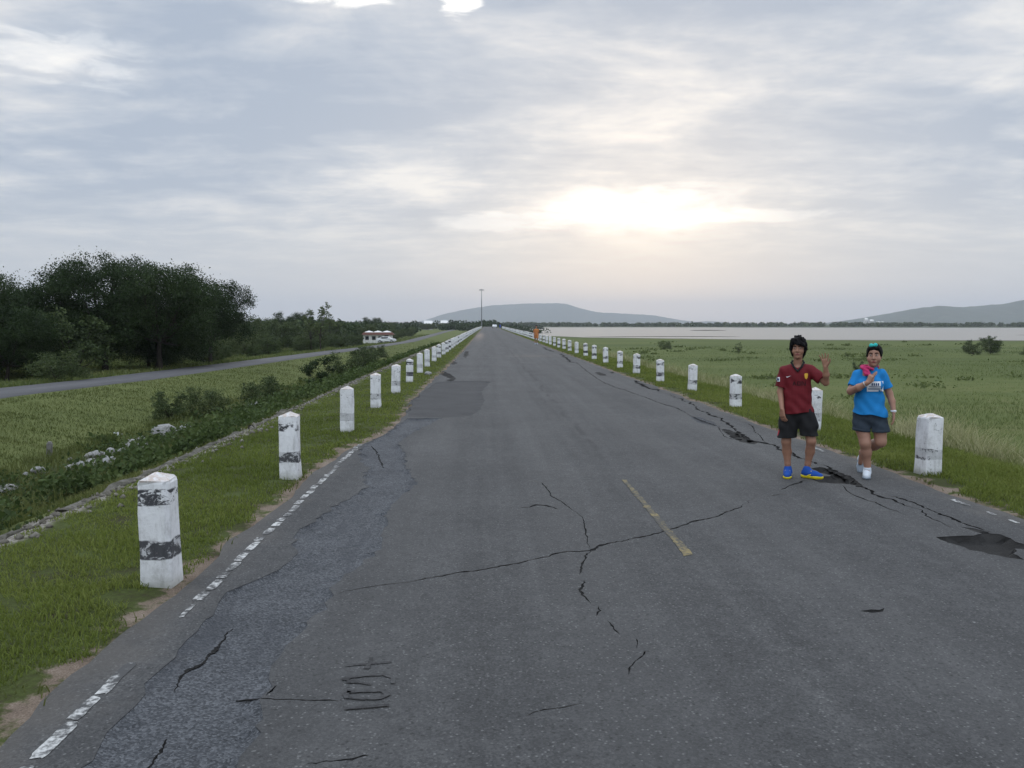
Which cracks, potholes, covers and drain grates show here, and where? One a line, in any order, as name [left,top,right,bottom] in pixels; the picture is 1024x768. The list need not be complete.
crack [147,629,333,768]
pothole [811,467,865,488]
pothole [937,527,1024,560]
crack [543,347,989,532]
crack [356,483,749,675]
